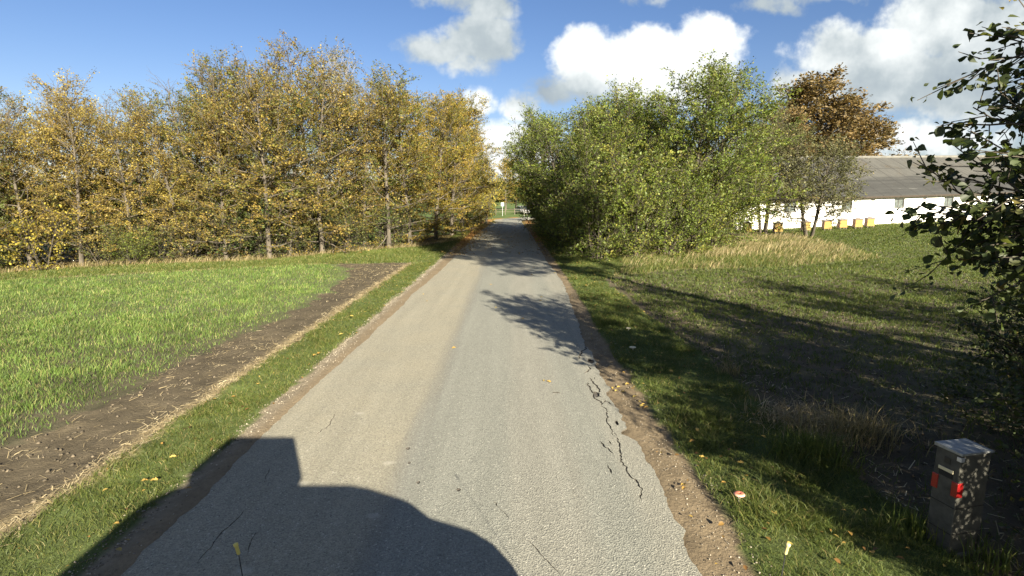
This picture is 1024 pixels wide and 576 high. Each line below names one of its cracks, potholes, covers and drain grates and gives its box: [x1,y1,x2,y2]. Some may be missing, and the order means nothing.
crack [199,510,256,560]
crack [578,347,643,500]
